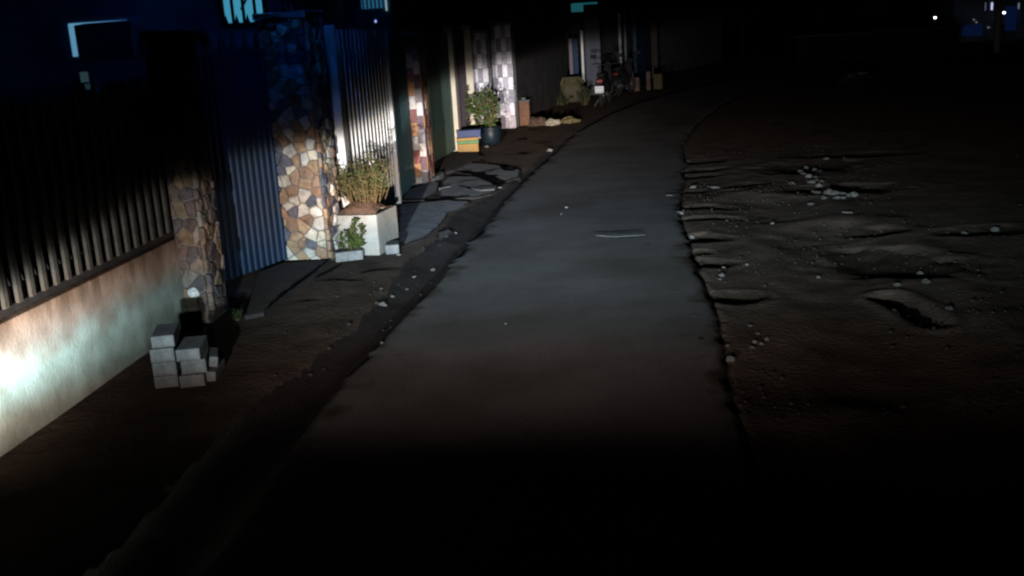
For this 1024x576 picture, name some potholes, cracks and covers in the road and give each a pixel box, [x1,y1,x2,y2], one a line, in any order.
pothole [770,184,909,194]
pothole [825,249,965,278]
